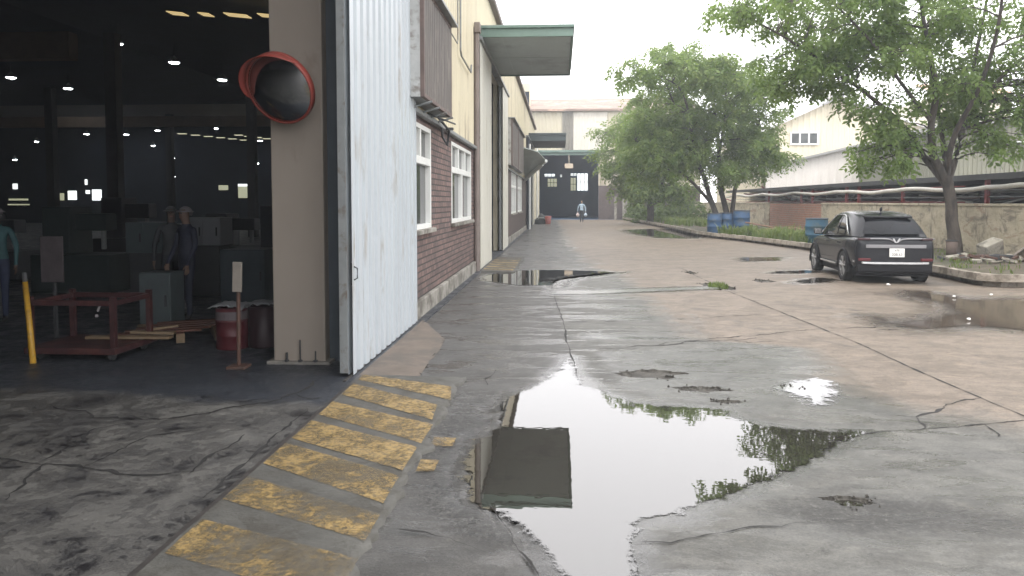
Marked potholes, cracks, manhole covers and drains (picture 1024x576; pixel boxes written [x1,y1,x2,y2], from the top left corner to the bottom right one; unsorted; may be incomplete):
crack [554,294,861,575]
pothole [615,369,689,380]
pothole [710,397,746,405]
pothole [818,494,881,510]
crack [0,380,320,500]
crack [868,398,1023,436]
pothole [667,384,733,393]
